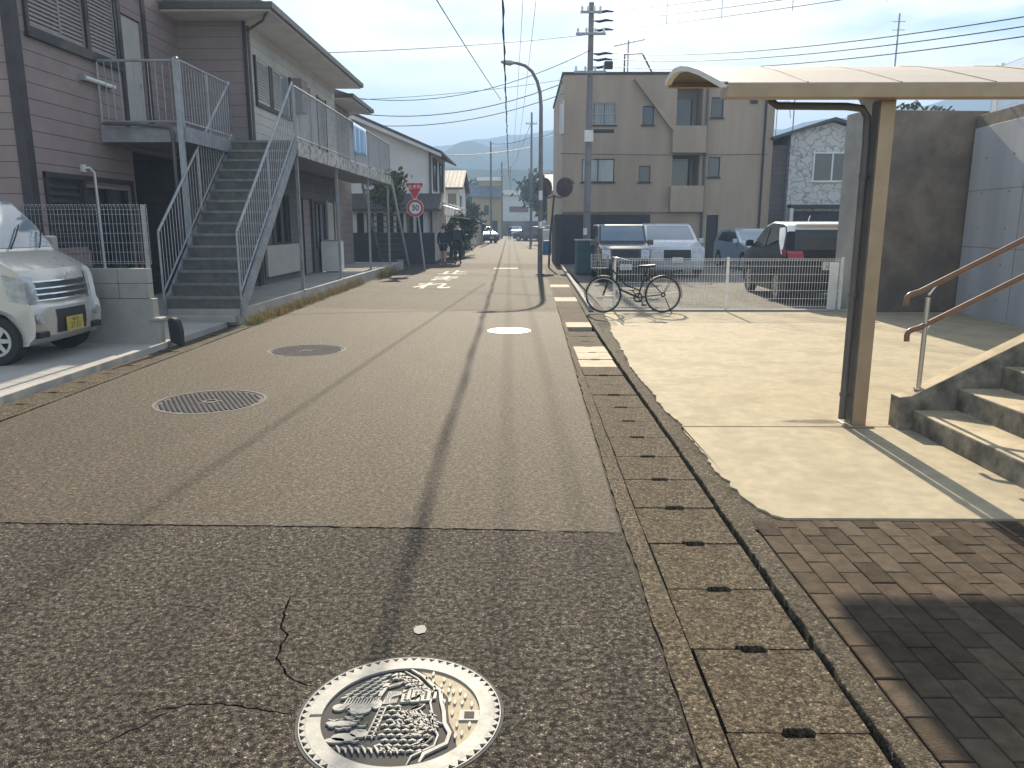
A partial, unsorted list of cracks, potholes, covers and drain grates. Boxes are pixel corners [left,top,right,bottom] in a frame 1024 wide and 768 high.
manhole cover [268,344,346,357]
crack [267,597,316,687]
crack [93,703,289,748]
manhole cover [151,390,267,414]
manhole cover [294,657,504,768]
